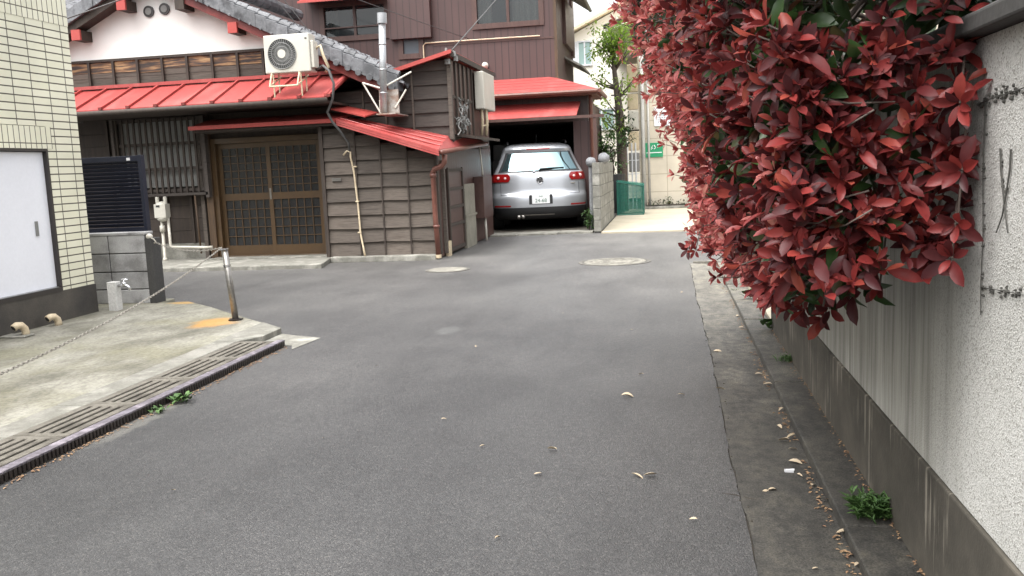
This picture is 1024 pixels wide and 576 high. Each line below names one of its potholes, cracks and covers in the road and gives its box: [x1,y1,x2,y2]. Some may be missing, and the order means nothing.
manhole cover [579,257,651,266]
